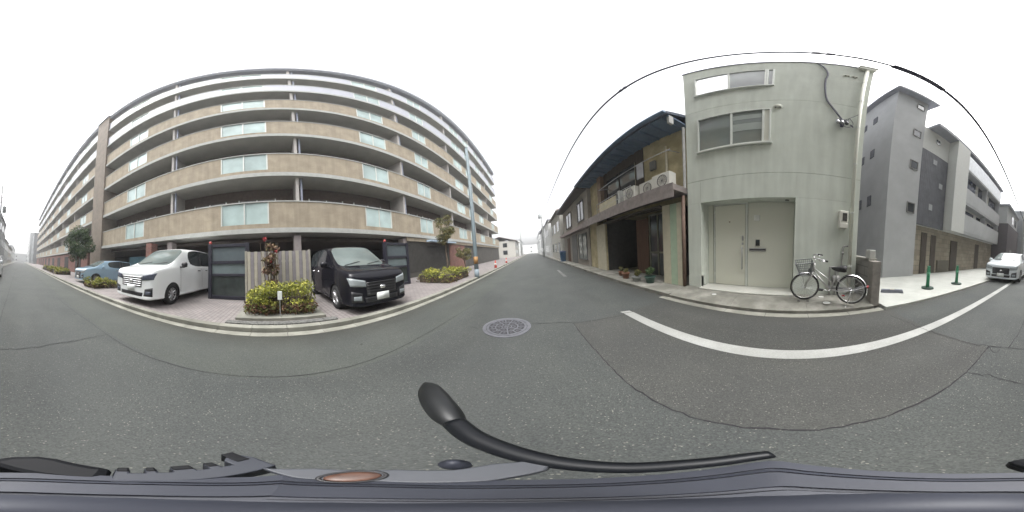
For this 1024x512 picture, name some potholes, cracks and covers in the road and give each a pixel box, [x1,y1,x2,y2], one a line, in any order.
manhole cover [483,318,531,338]
